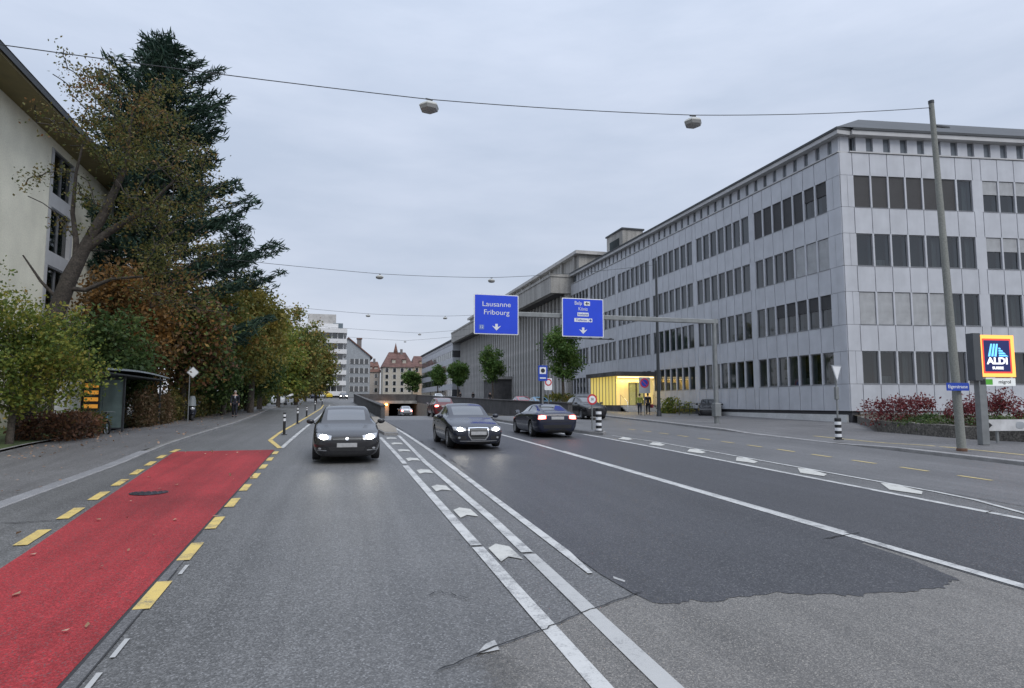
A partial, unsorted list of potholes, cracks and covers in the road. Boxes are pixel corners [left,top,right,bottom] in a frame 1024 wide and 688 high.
crack [438,591,642,670]
